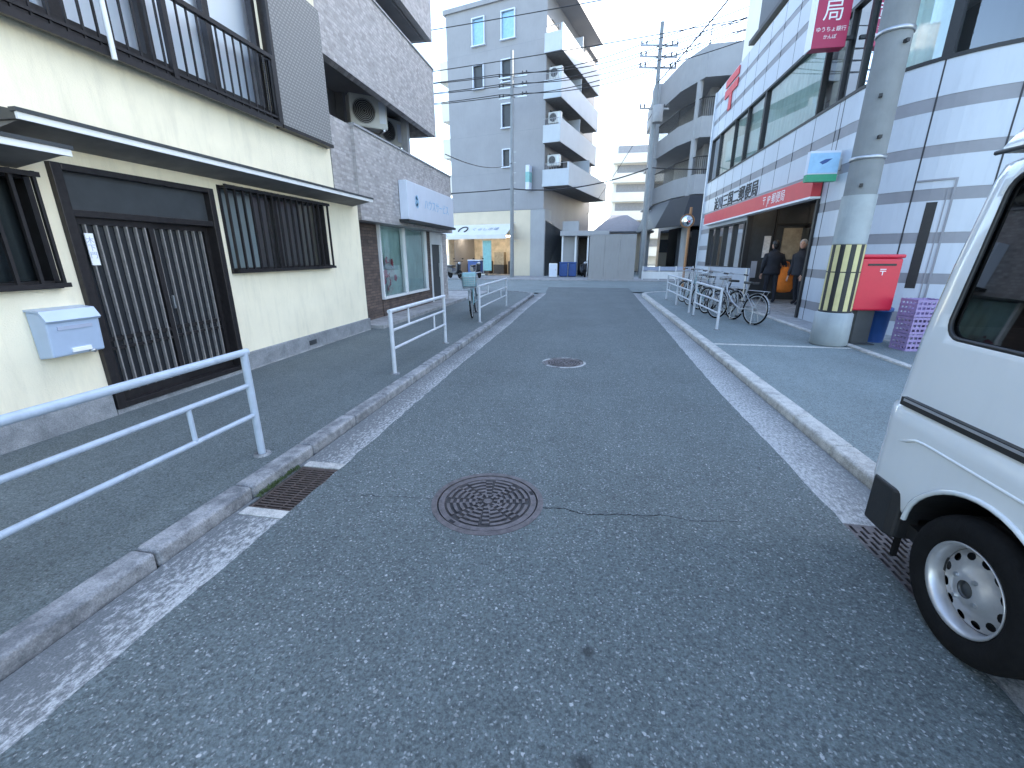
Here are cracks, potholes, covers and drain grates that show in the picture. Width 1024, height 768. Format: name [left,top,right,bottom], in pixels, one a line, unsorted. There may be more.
manhole cover [542,357,586,368]
drain grate [239,461,346,519]
manhole cover [431,473,543,536]
crack [543,507,737,522]
drain grate [843,523,915,599]
